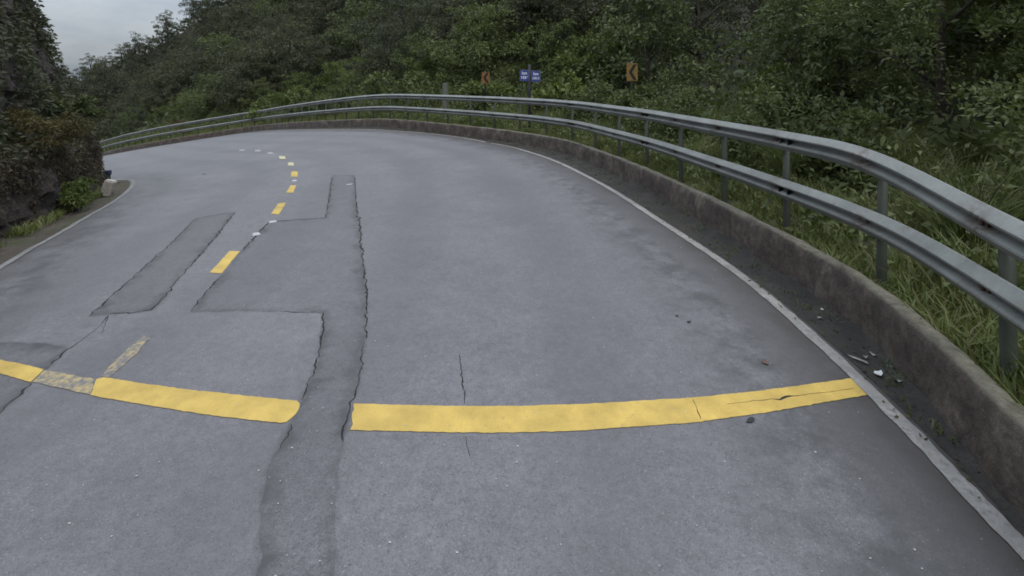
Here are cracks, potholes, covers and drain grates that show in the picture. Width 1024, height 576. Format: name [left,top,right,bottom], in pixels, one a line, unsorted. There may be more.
crack [341,178,368,442]
crack [0,213,235,414]
